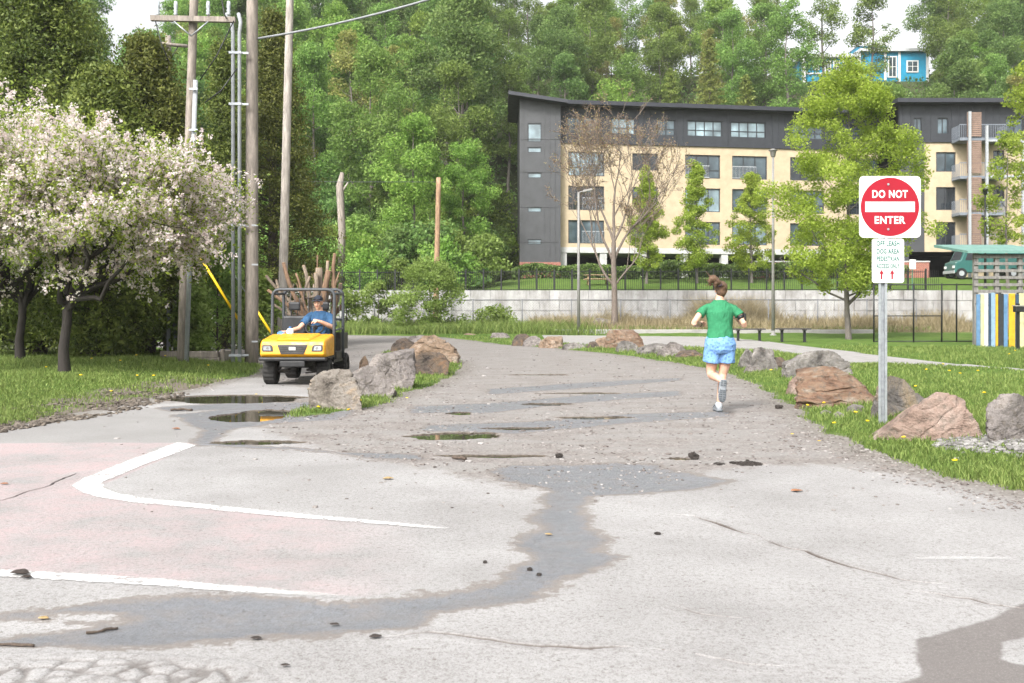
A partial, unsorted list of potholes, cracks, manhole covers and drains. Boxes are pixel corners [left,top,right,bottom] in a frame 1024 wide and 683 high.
crack [0,471,89,505]
pothole [387,431,515,442]
pothole [414,452,567,460]
pothole [190,439,324,447]
pothole [196,408,300,424]
crack [354,511,1024,675]
